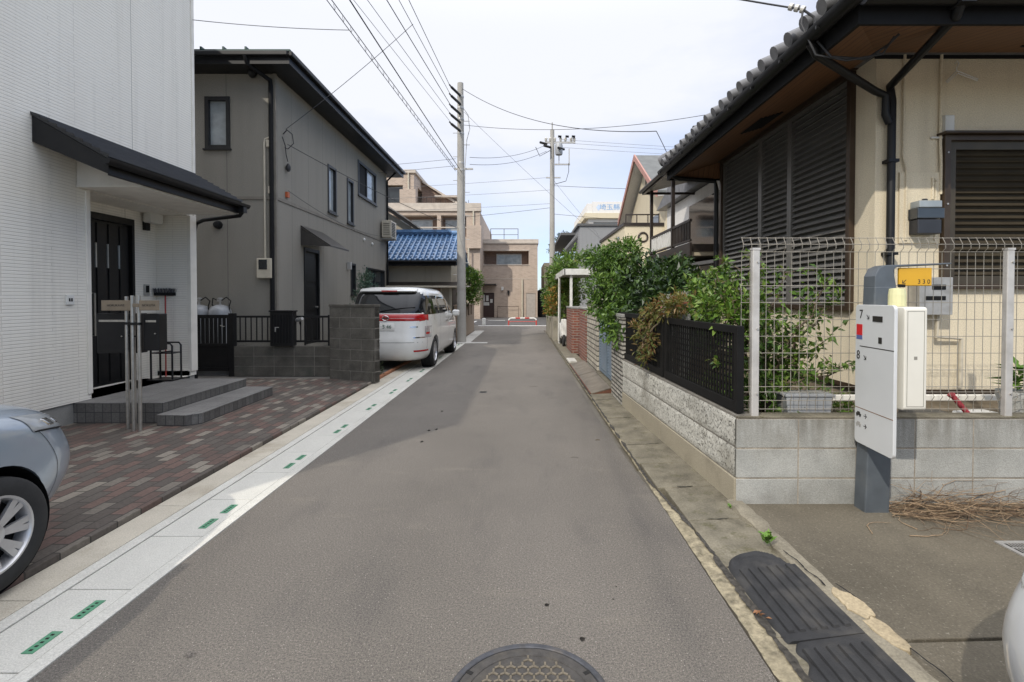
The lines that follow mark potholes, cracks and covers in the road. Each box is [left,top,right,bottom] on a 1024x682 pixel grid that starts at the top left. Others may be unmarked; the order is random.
crack [783,550,862,601]
manhole cover [452,643,605,682]
drain grate [994,541,1024,557]
